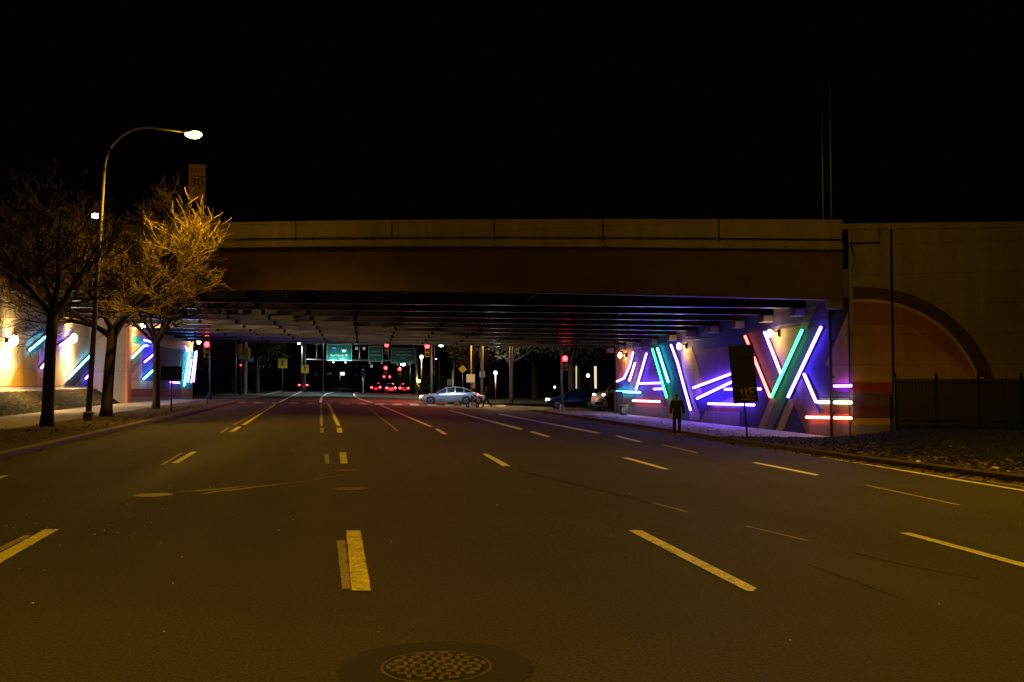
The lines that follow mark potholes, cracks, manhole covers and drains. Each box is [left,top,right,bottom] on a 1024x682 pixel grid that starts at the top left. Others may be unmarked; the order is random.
manhole cover [337,641,536,682]
crack [520,470,650,503]
crack [856,553,985,581]
